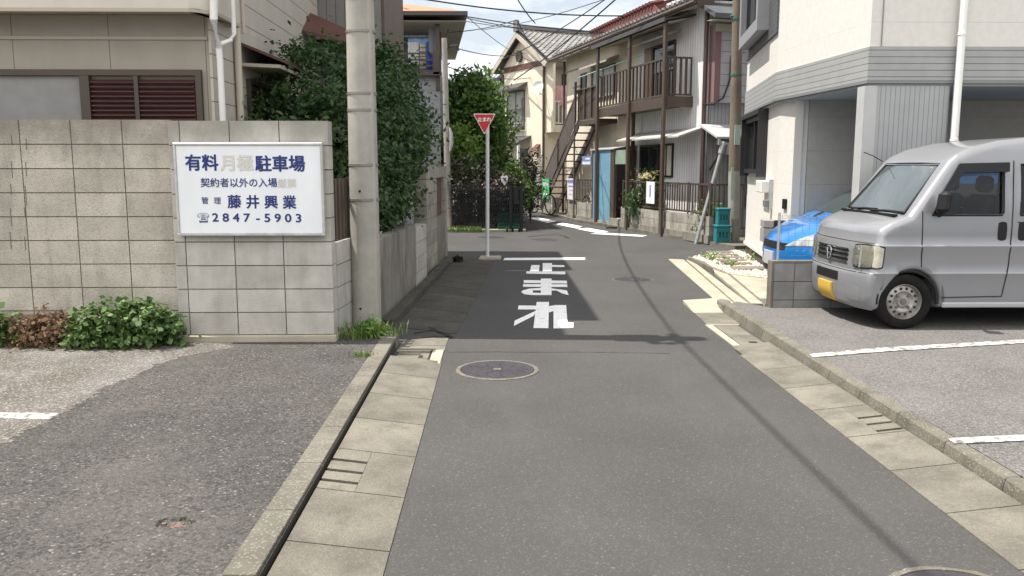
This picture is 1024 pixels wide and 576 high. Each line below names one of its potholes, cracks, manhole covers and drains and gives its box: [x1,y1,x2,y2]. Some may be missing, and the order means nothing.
pothole [155,516,196,529]
manhole cover [889,566,990,576]
manhole cover [456,360,539,381]
